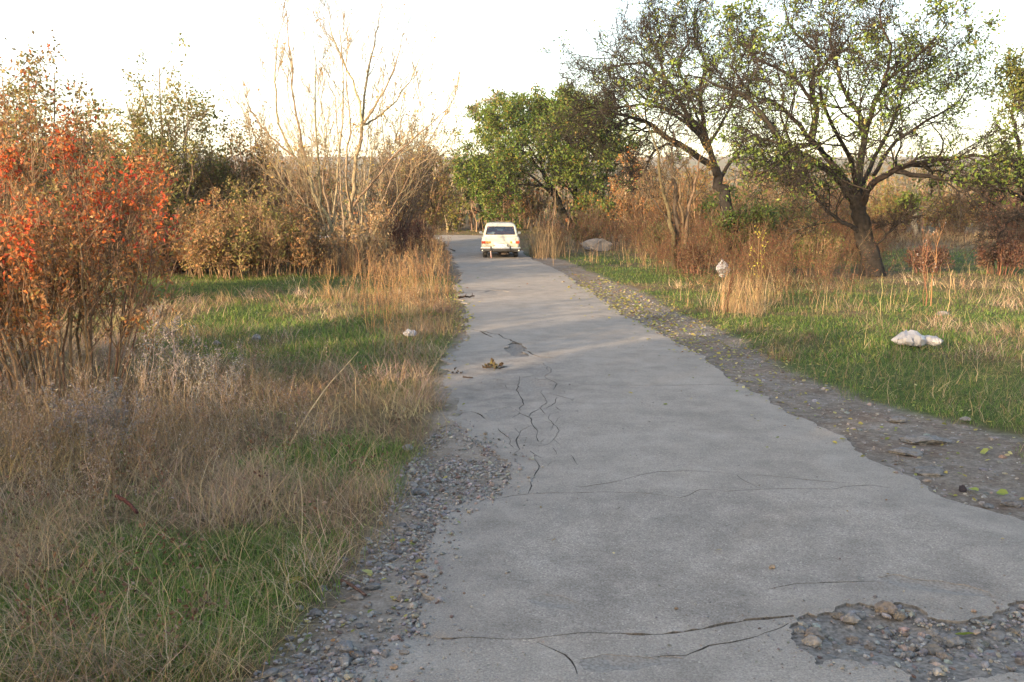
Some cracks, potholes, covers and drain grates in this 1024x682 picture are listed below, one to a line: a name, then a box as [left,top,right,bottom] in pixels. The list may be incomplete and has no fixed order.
pothole [789,601,1024,682]
crack [765,581,867,590]
crack [458,362,888,499]
crack [469,328,559,359]
crack [441,615,794,674]
pothole [504,342,529,357]
